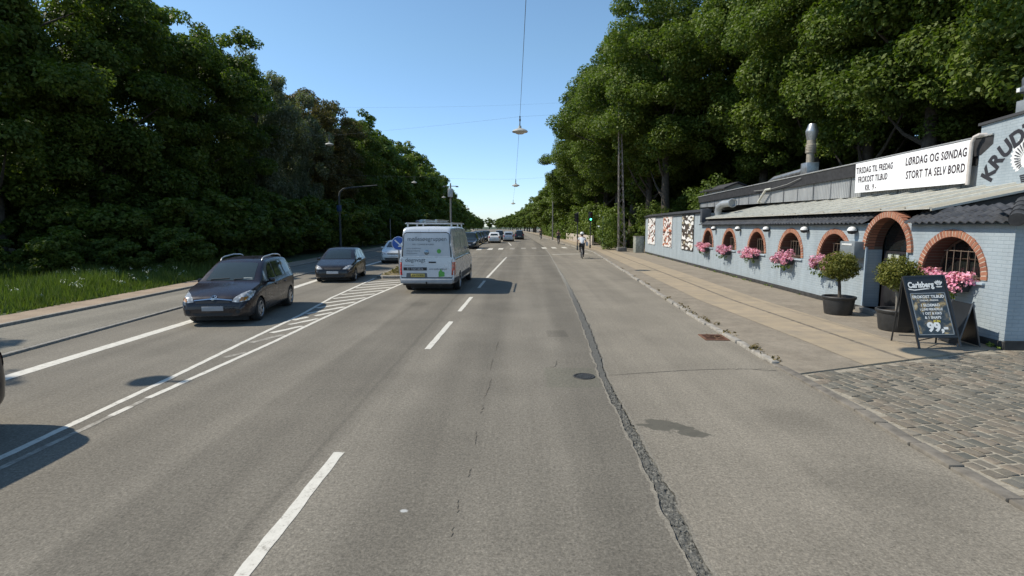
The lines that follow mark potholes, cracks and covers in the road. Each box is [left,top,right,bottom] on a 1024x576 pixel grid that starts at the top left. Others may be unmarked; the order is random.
drain grate [698,332,730,341]
